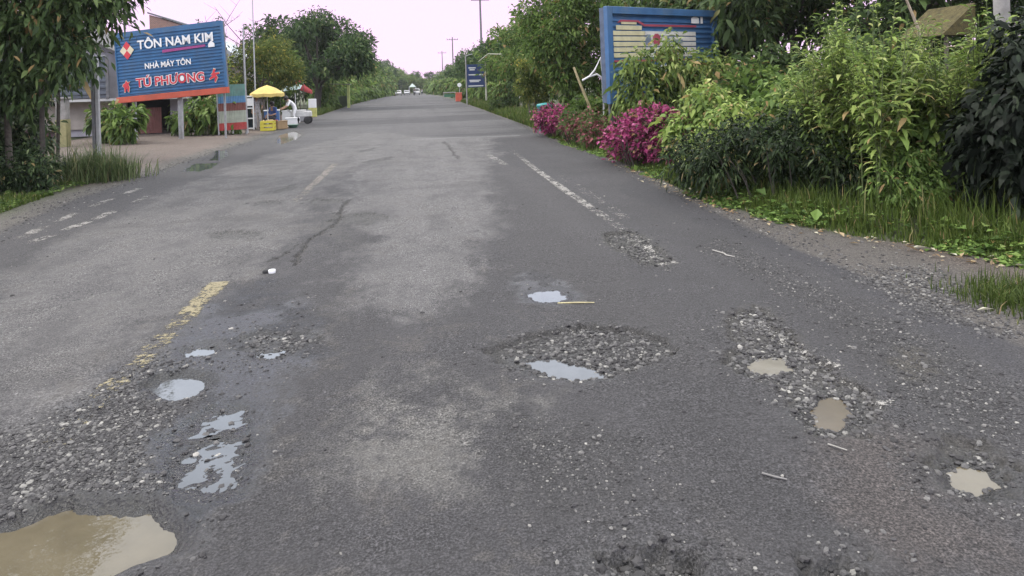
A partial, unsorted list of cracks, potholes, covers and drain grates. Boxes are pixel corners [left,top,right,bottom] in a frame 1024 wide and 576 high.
pothole [910,427,1024,505]
pothole [0,490,200,576]
crack [269,199,352,266]
pothole [713,302,893,440]
pothole [134,366,229,403]
pothole [598,228,685,270]
crack [442,141,460,159]
pothole [228,326,333,362]
pothole [140,399,273,519]
pothole [475,320,686,385]
